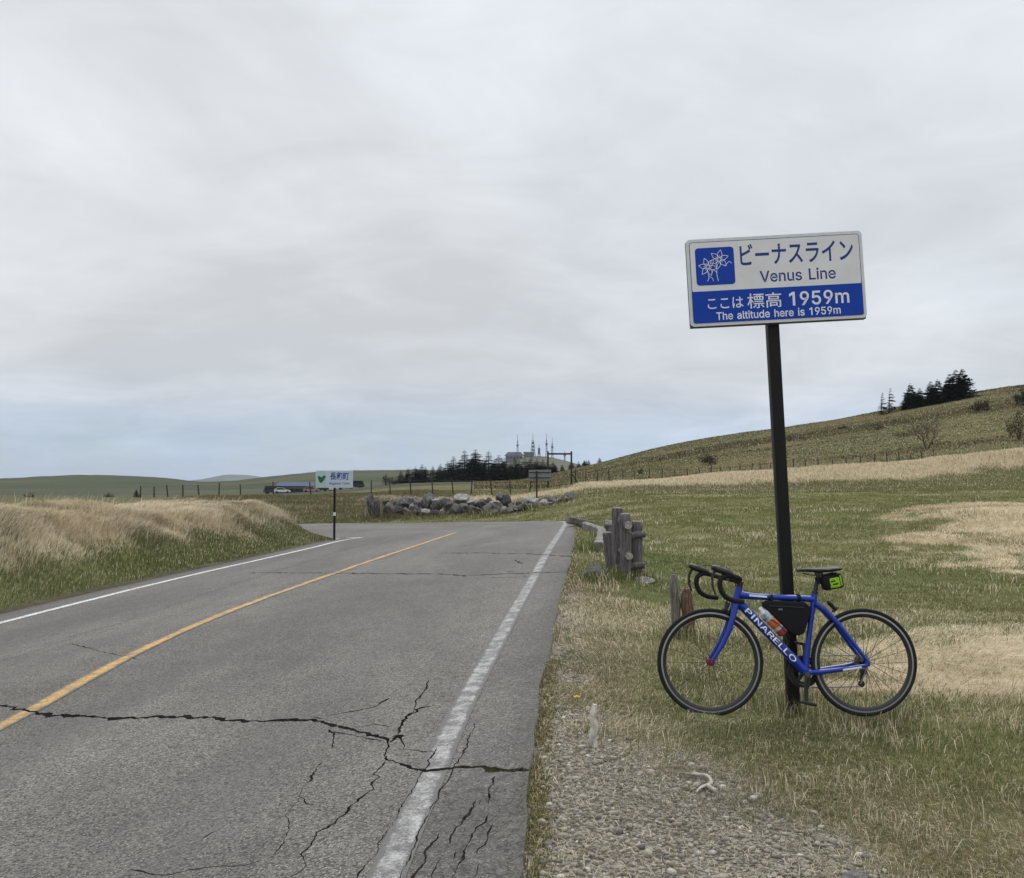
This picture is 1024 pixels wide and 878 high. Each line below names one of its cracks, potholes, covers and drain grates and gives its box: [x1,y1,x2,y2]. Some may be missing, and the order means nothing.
crack [0,680,529,878]
